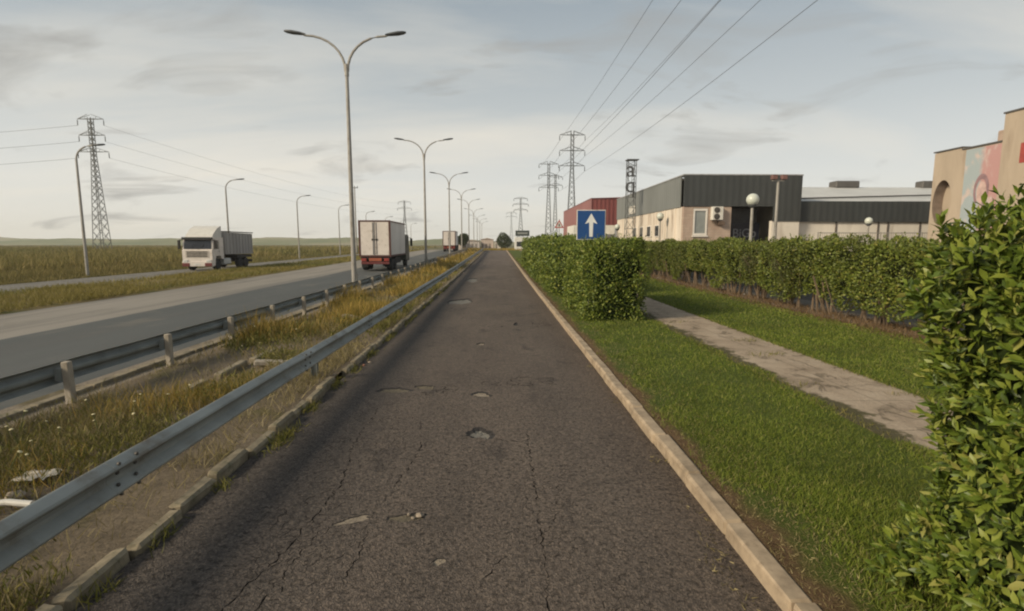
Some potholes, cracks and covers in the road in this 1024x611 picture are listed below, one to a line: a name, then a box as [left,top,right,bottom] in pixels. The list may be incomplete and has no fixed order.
pothole [332,514,371,525]
crack [221,402,417,611]
crack [501,433,651,611]
pothole [466,427,495,439]
